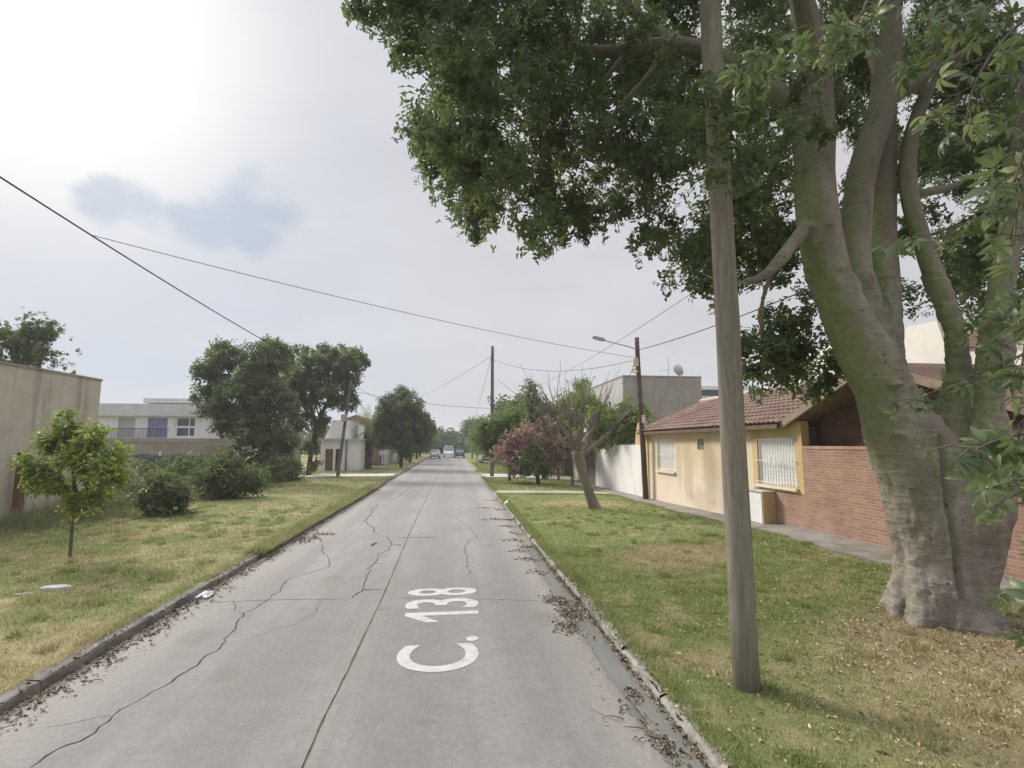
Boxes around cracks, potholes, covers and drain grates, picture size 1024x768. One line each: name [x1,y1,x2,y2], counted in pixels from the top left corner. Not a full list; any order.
crack [352,485,417,598]
crack [30,544,330,768]
